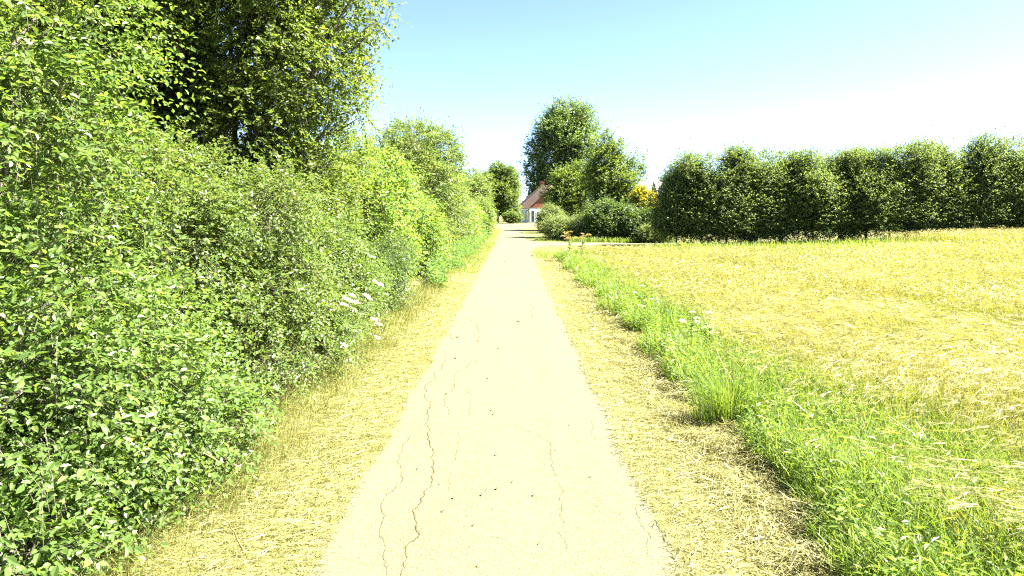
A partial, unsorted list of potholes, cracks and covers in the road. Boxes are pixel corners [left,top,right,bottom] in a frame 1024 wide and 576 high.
crack [373,318,480,576]
crack [522,418,568,547]
